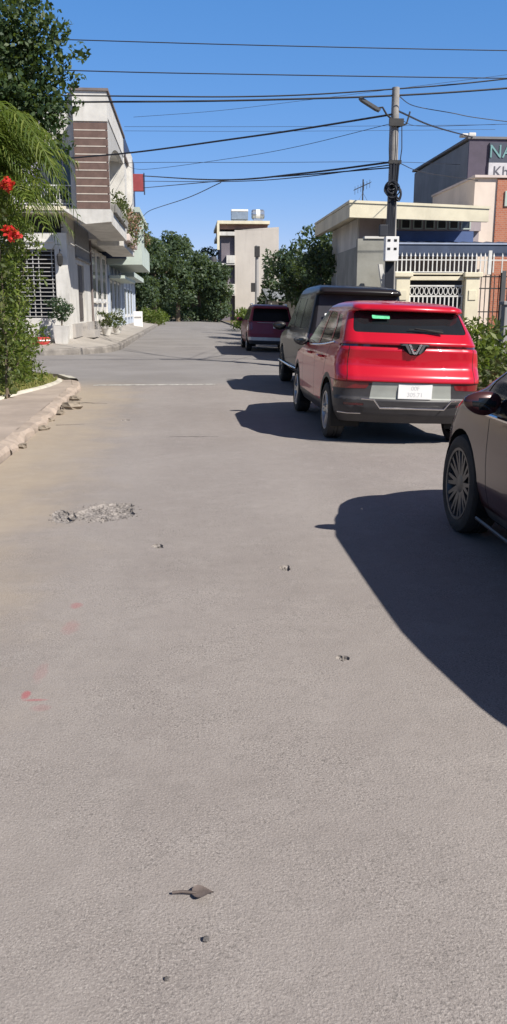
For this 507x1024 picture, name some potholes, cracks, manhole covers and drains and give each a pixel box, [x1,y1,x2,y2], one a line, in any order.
pothole [68,502,141,523]
pothole [48,510,78,524]
